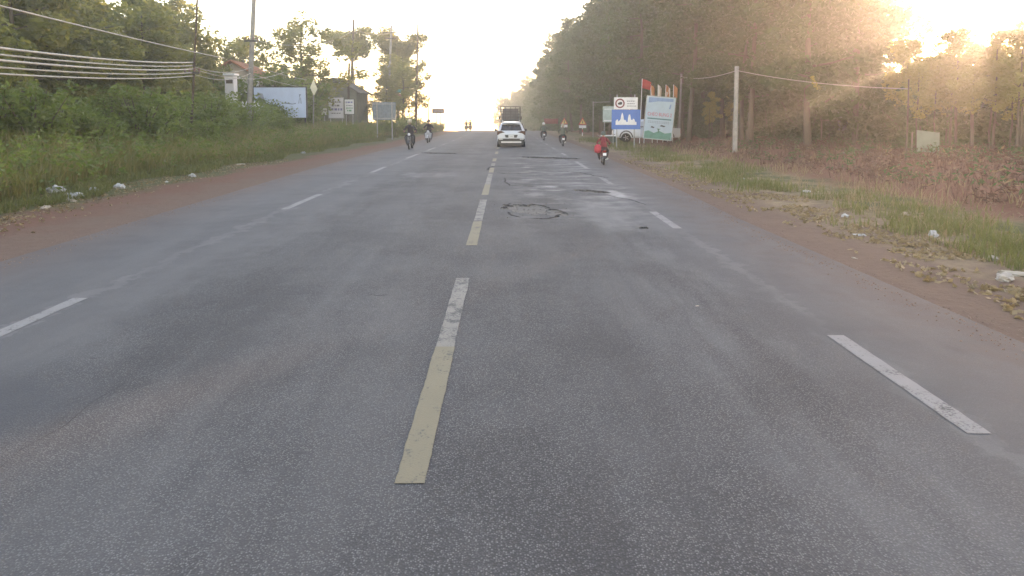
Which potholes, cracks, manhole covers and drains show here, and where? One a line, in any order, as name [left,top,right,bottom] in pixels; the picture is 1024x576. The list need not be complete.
crack [467,154,606,188]
pothole [493,202,576,219]
